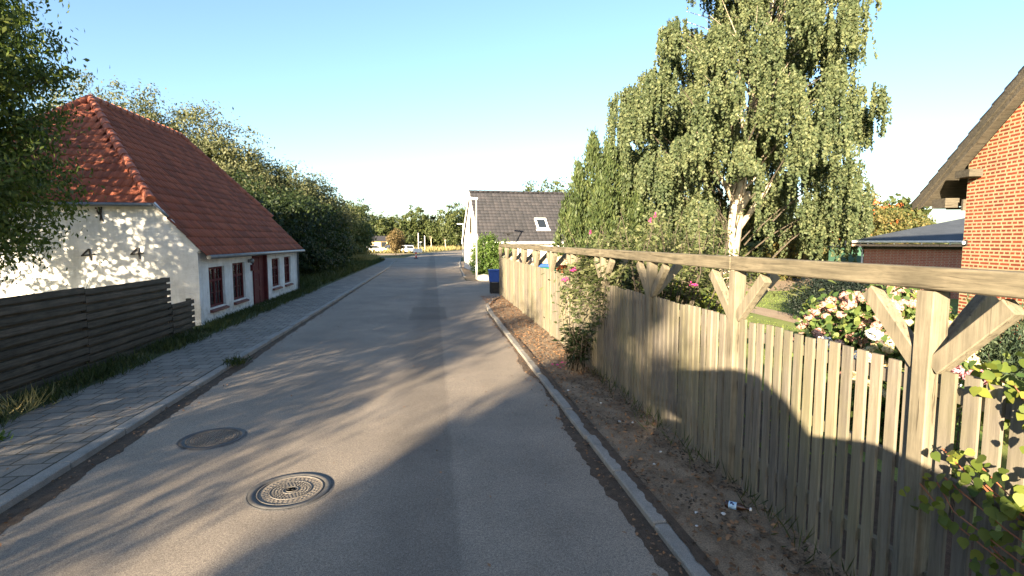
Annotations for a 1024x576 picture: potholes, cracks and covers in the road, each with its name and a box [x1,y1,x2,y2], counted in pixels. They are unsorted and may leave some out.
manhole cover [176,427,248,451]
manhole cover [244,472,335,511]
